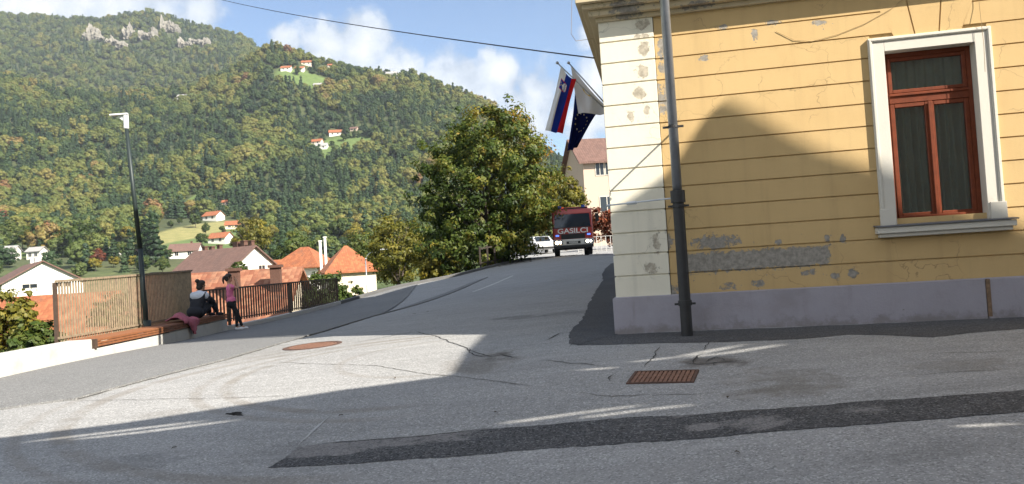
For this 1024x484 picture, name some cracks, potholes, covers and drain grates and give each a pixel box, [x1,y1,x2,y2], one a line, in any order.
drain grate [626,369,699,384]
manhole cover [282,341,342,351]
crack [549,333,713,396]
crack [365,332,515,358]
crack [686,342,738,365]
